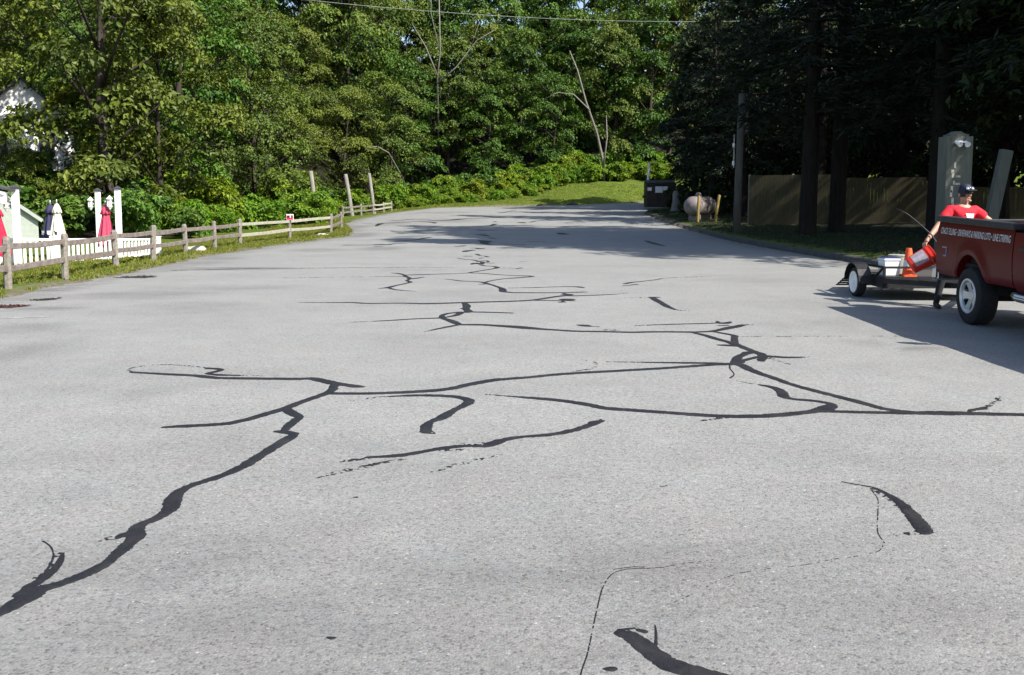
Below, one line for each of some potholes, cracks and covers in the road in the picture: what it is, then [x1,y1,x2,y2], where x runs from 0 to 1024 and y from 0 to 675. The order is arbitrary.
crack [171,267,453,278]
